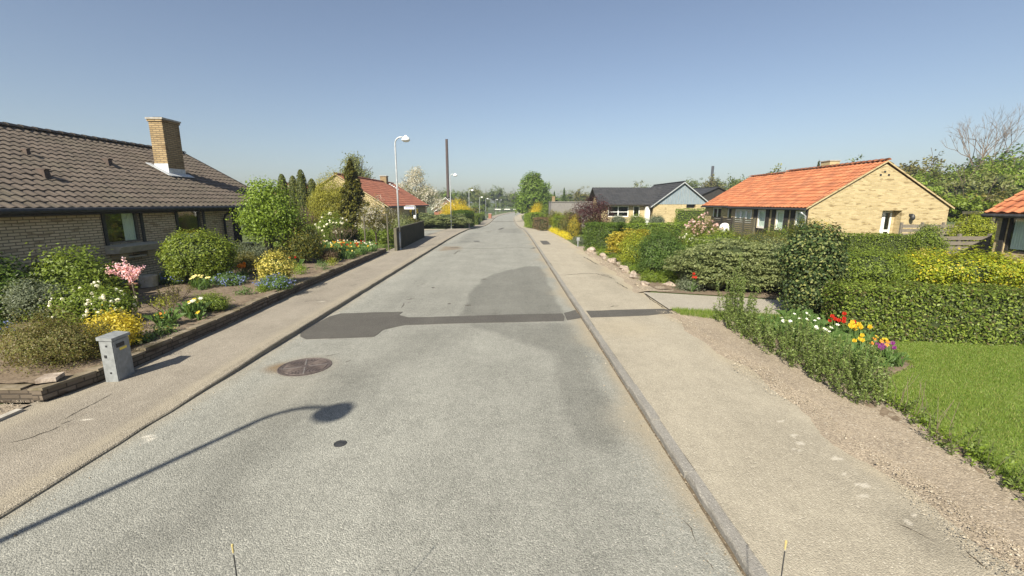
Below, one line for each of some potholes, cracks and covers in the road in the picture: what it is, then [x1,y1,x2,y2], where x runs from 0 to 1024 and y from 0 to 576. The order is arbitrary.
manhole cover [277,358,332,376]
